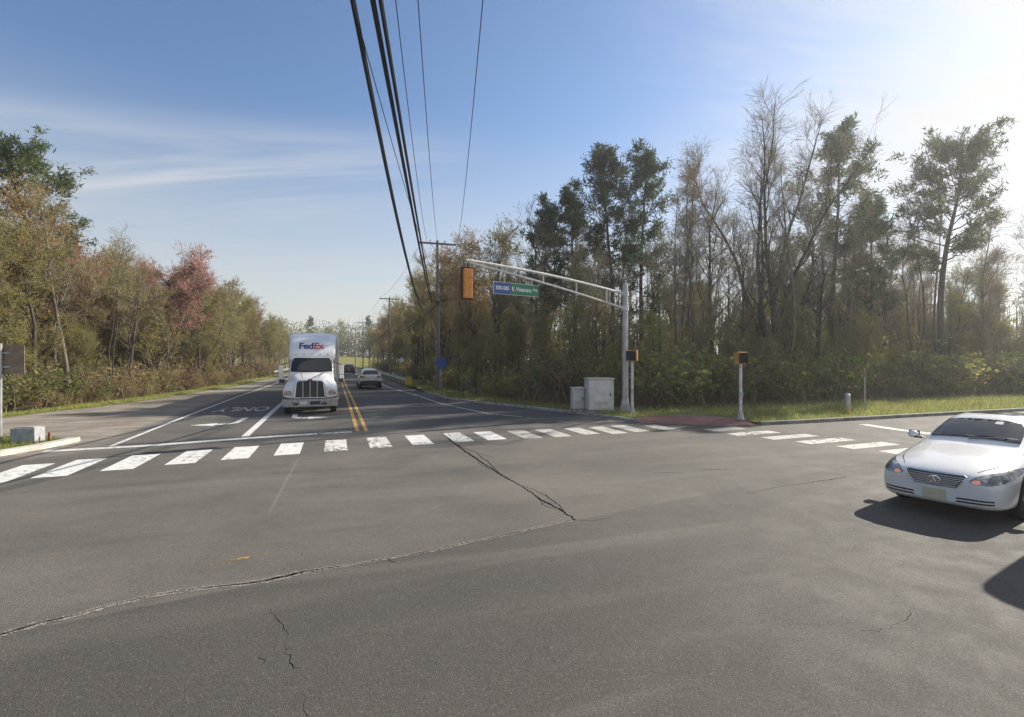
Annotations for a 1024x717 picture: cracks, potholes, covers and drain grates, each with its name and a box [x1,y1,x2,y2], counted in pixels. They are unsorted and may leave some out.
crack [446,435,575,520]
